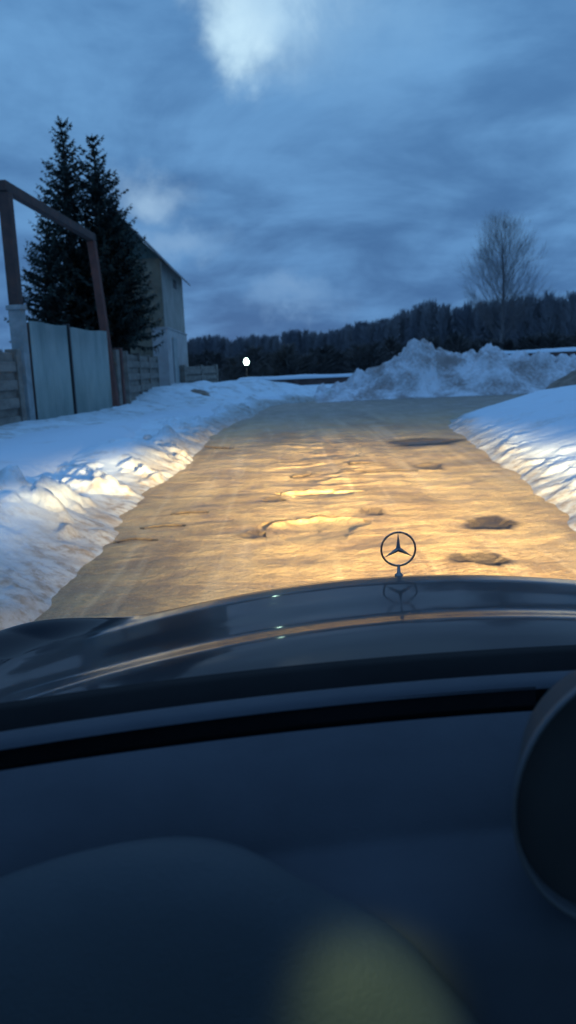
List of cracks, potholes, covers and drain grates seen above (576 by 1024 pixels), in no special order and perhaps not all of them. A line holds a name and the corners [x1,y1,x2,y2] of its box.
pothole [377,437,470,448]
pothole [456,514,528,532]
pothole [437,551,523,569]
pothole [407,462,448,472]
pothole [356,506,389,522]
